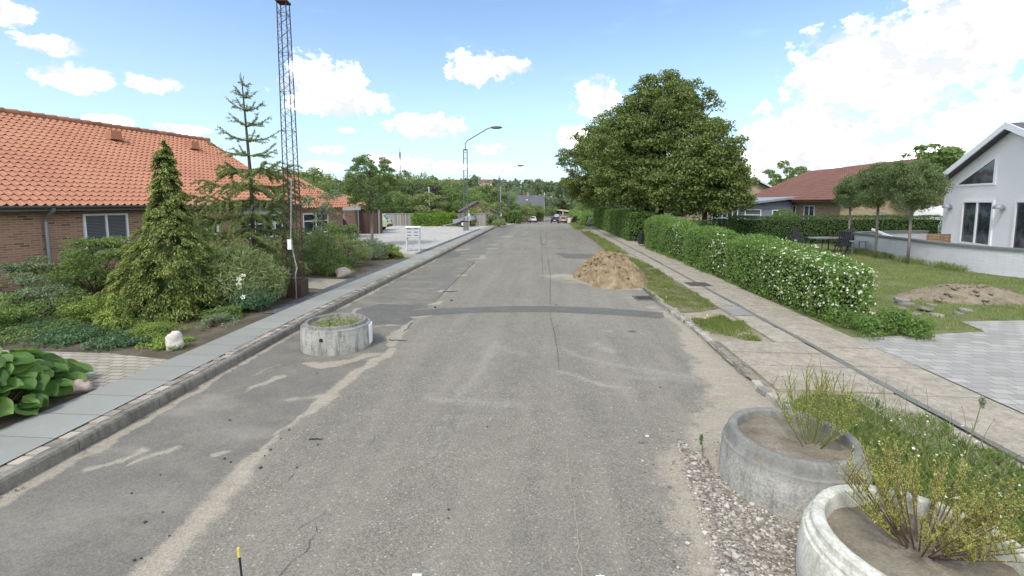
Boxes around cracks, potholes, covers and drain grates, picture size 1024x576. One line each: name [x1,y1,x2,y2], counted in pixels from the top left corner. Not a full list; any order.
crack [567,449,583,576]
crack [495,233,560,368]
